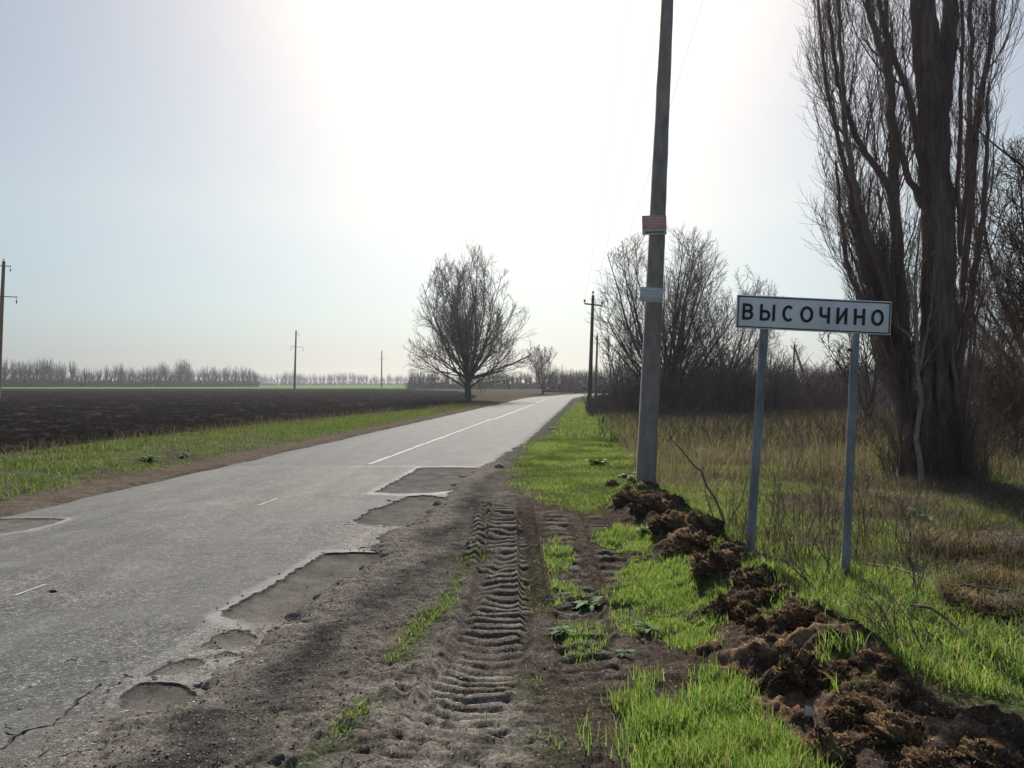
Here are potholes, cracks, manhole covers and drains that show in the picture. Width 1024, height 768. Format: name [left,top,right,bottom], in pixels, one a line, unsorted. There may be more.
pothole [142,658,206,677]
pothole [114,682,201,712]
pothole [201,629,259,649]
pothole [353,495,447,527]
pothole [374,467,476,494]
pothole [0,518,64,533]
crack [0,683,102,760]
pothole [220,552,382,624]
